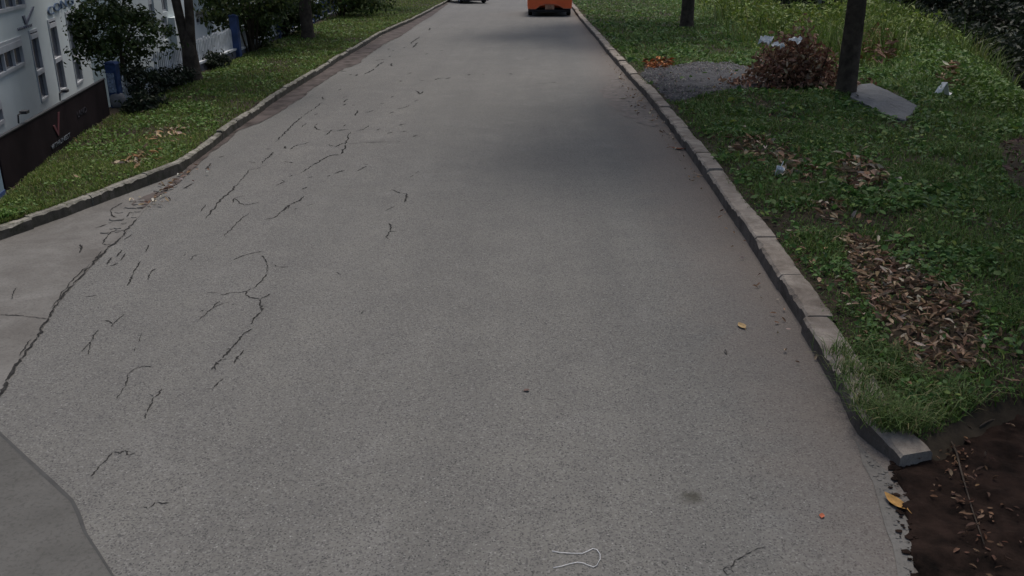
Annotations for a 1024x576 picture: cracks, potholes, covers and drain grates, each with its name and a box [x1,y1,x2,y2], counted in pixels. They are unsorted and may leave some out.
crack [183,29,451,236]
crack [83,315,123,354]
crack [199,251,288,388]
crack [79,203,155,285]
